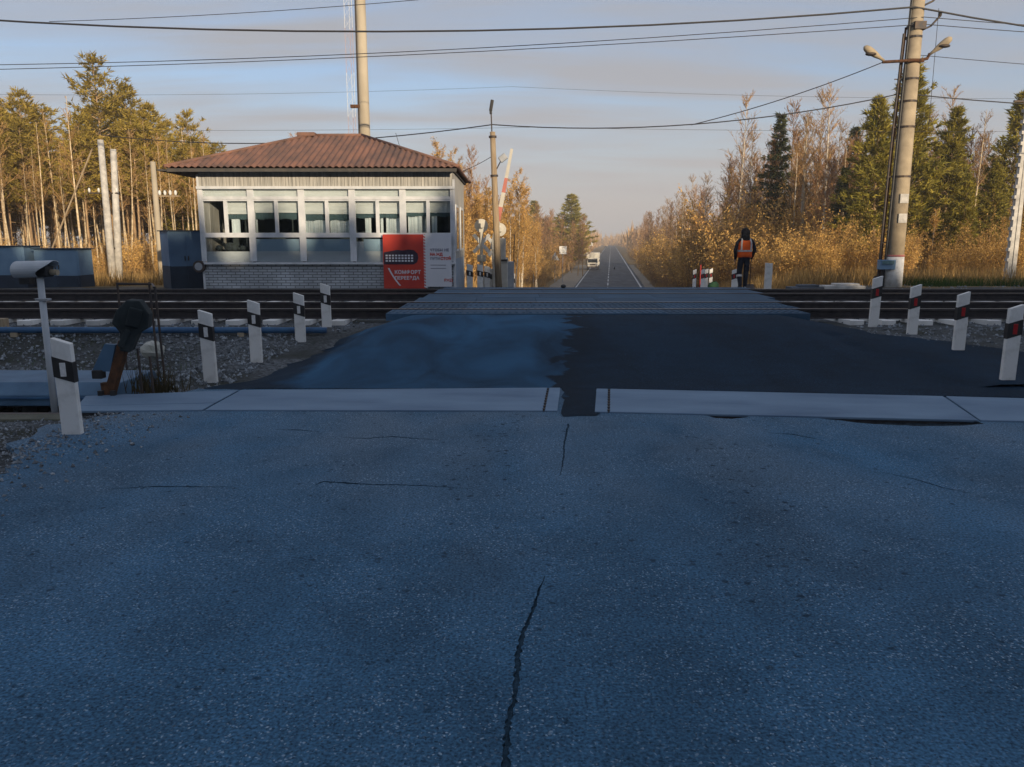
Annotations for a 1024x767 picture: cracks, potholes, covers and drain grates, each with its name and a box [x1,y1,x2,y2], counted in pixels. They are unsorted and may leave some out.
crack [501,576,545,767]
crack [559,424,570,476]
crack [316,481,468,489]
